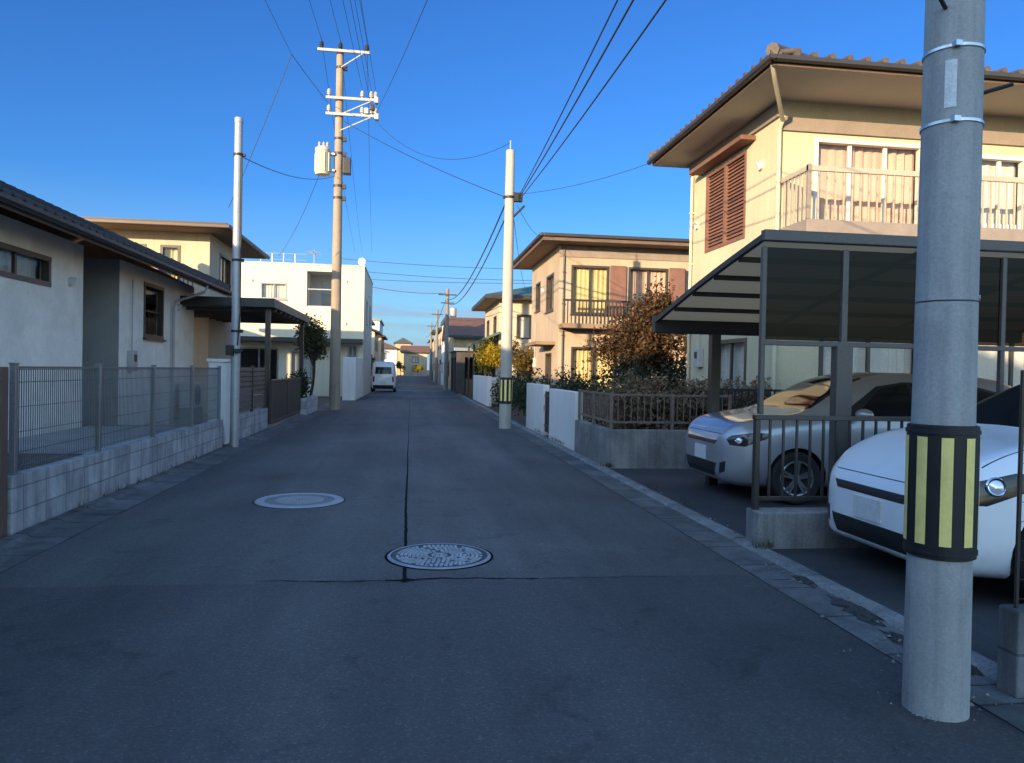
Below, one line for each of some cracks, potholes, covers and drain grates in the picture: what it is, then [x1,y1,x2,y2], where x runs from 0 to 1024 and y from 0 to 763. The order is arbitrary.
manhole cover [252,493,346,509]
manhole cover [385,543,494,571]
